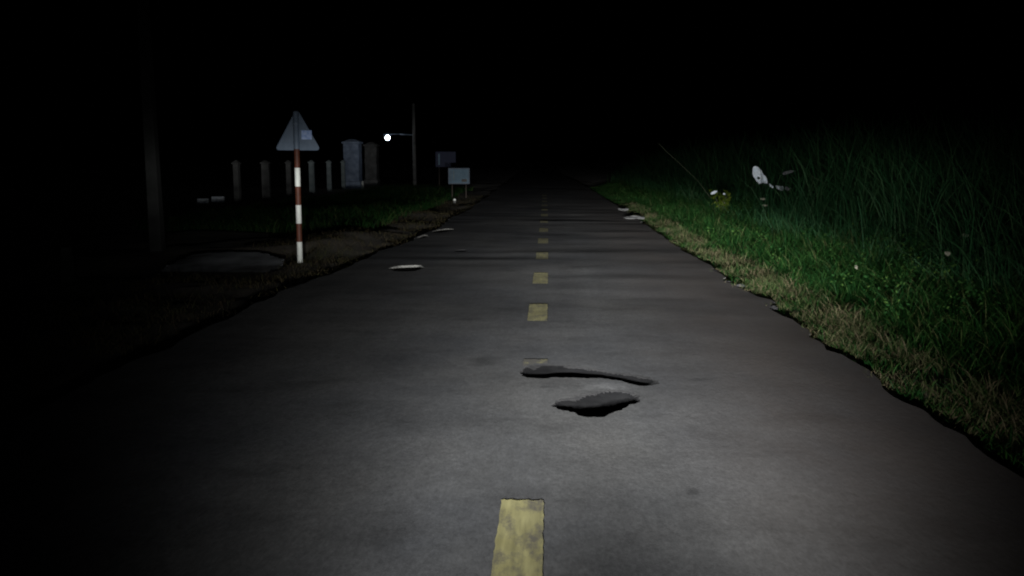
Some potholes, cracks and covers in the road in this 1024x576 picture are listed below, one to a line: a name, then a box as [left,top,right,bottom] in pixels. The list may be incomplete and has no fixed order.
pothole [551,389,640,417]
pothole [520,364,660,386]
